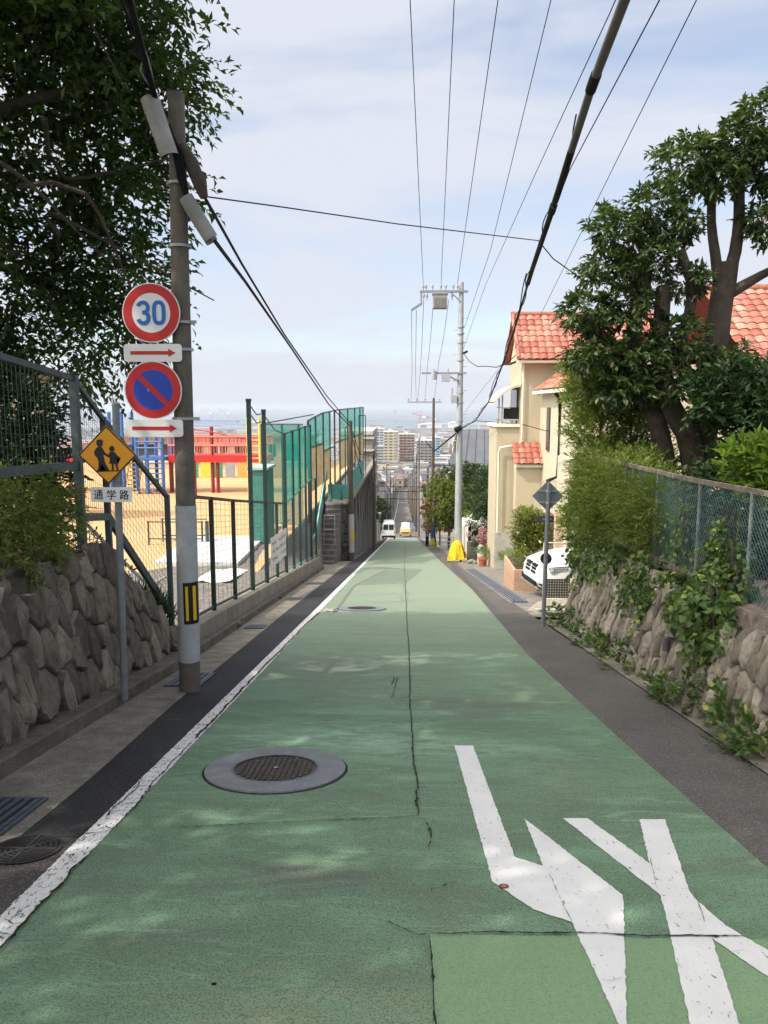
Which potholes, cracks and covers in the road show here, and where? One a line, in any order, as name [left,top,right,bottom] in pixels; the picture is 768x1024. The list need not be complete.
drain grate [164,672,216,687]
drain grate [0,796,48,836]
manhole cover [0,834,63,864]
manhole cover [202,747,348,794]
drain grate [466,569,528,602]
crack [172,567,432,850]
